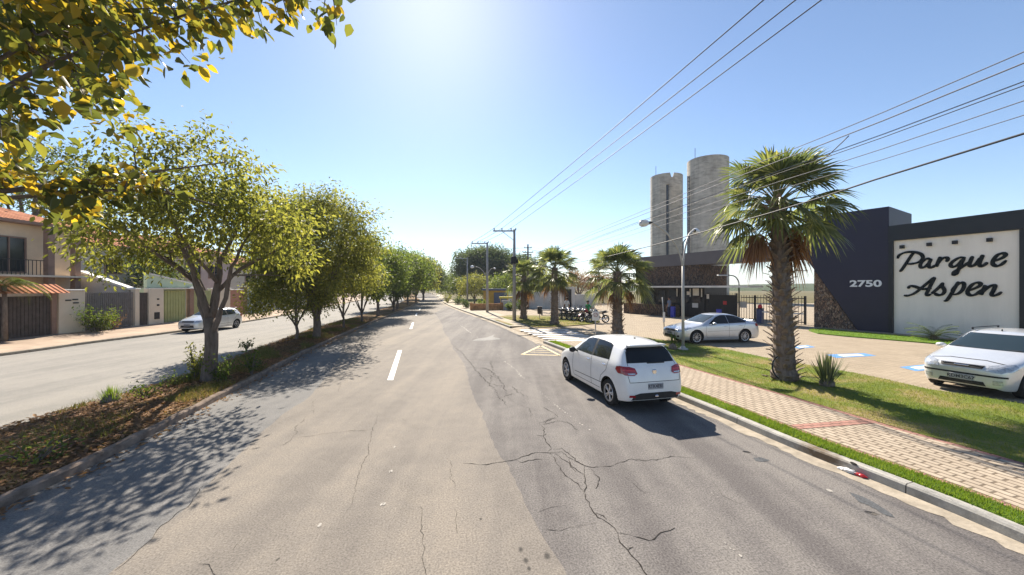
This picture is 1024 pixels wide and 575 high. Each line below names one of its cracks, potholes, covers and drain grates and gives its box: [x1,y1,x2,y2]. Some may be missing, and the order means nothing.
crack [453,345,533,417]
crack [447,408,689,575]
